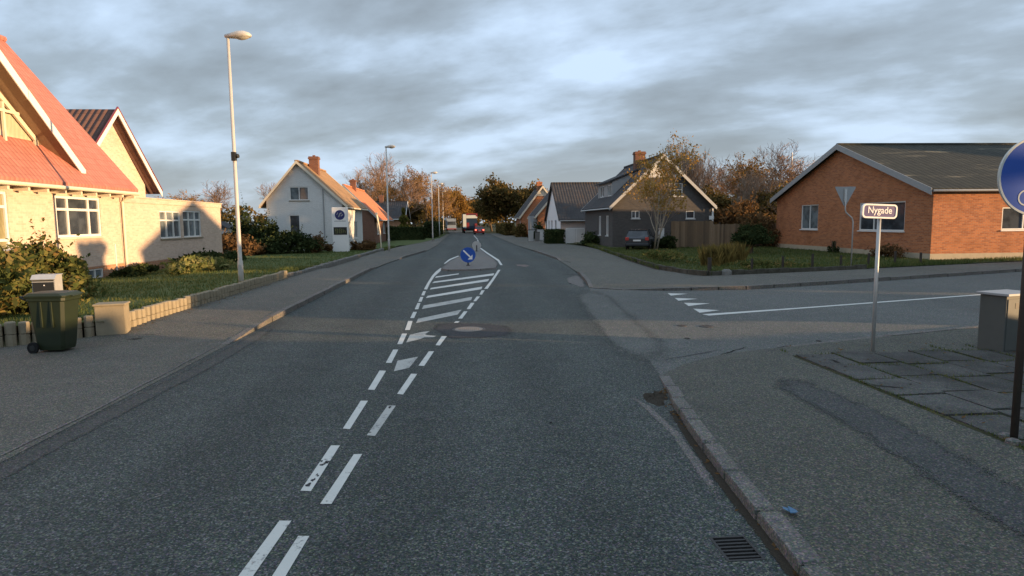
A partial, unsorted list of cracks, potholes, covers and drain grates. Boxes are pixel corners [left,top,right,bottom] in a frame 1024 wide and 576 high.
drain grate [709,535,766,562]
pothole [643,390,668,407]
